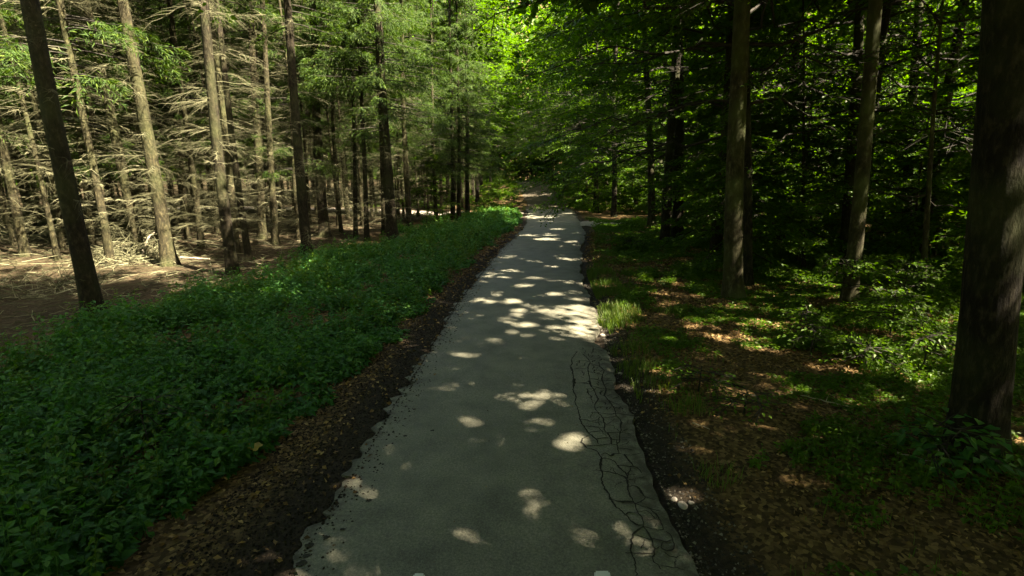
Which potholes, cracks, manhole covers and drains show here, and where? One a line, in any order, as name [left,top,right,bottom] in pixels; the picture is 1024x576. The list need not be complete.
crack [570,348,683,576]
